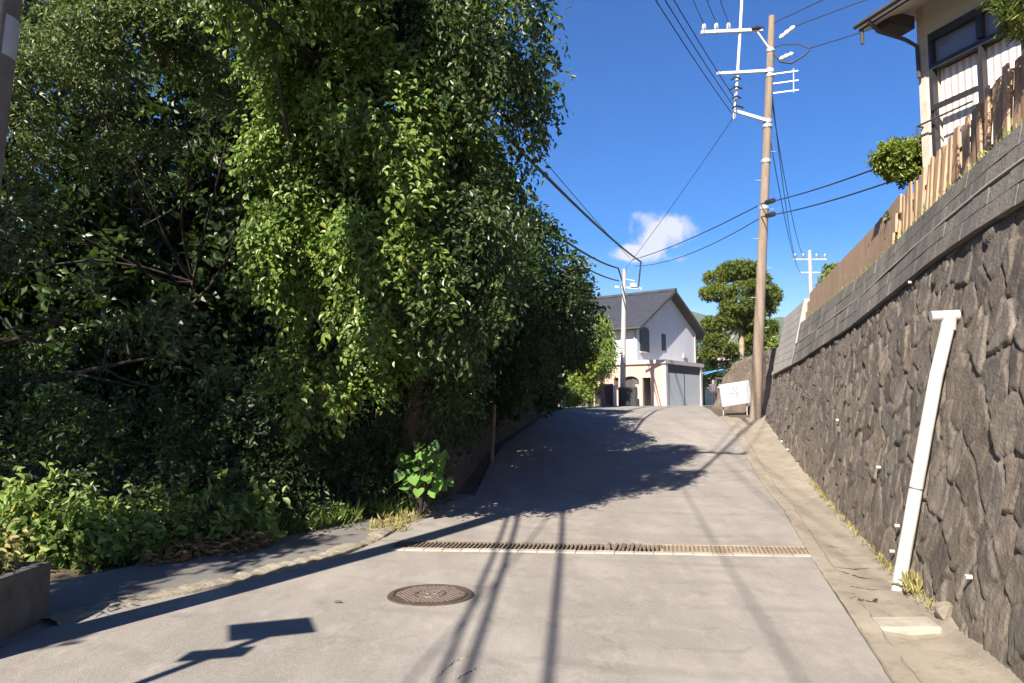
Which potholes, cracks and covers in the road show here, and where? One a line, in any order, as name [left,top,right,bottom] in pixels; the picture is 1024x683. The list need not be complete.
crack [832,565,881,604]
crack [435,656,479,680]
manhole cover [387,584,475,606]
